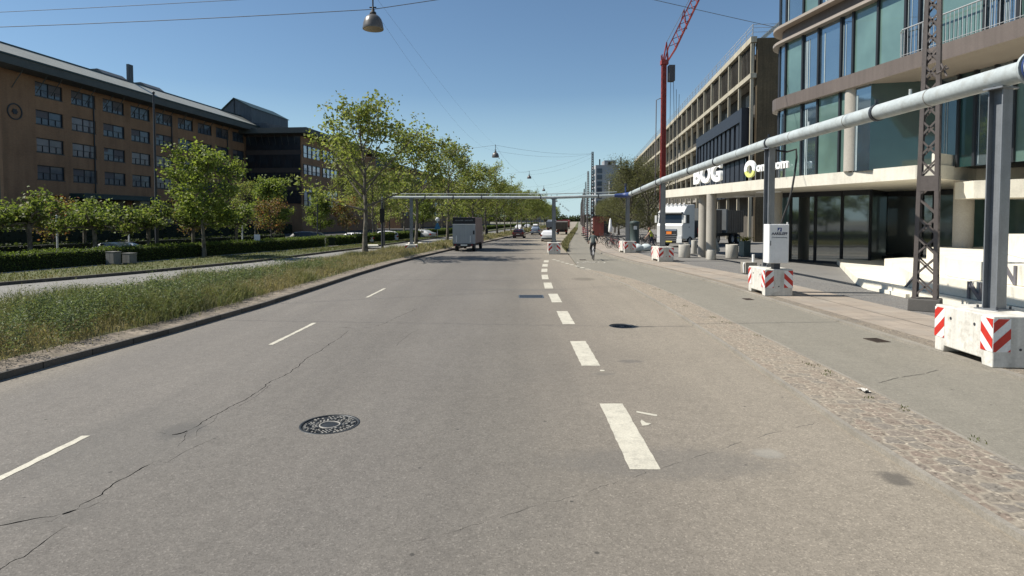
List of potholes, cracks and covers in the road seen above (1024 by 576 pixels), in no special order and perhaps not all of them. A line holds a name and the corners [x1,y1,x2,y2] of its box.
crack [0,309,419,569]
manhole cover [299,414,360,435]
